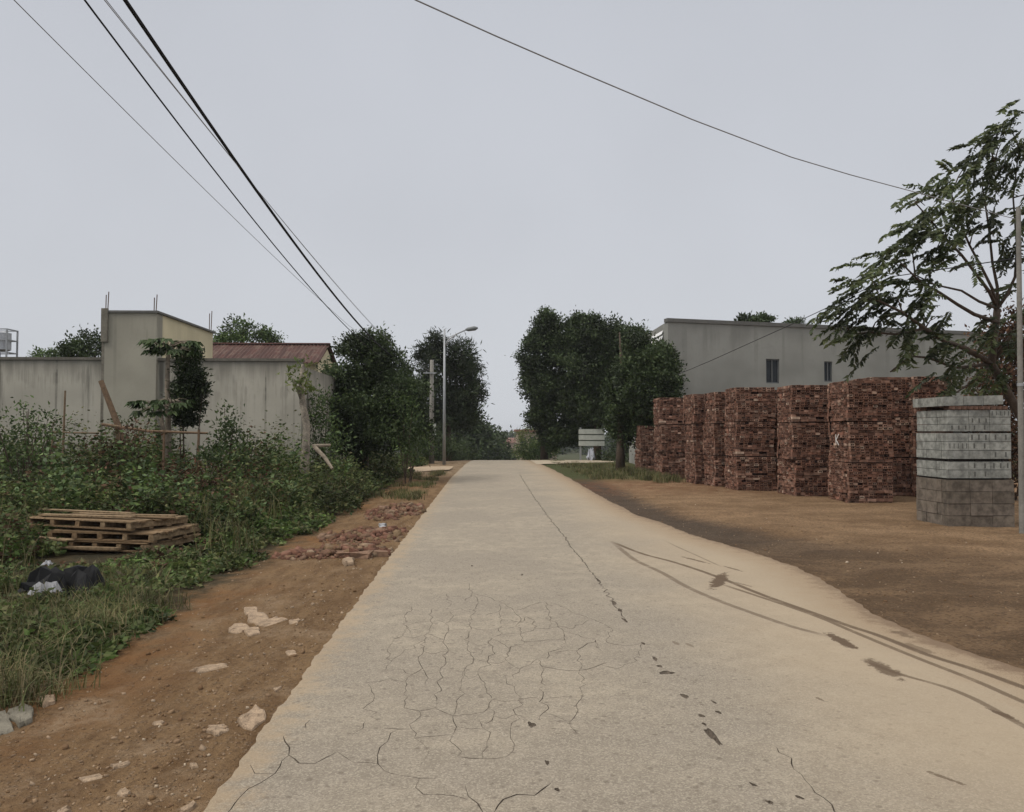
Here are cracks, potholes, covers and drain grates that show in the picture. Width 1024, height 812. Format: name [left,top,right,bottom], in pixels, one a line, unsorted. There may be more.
crack [338,584,642,812]
crack [228,720,334,812]
crack [520,474,626,620]
crack [777,748,835,812]
